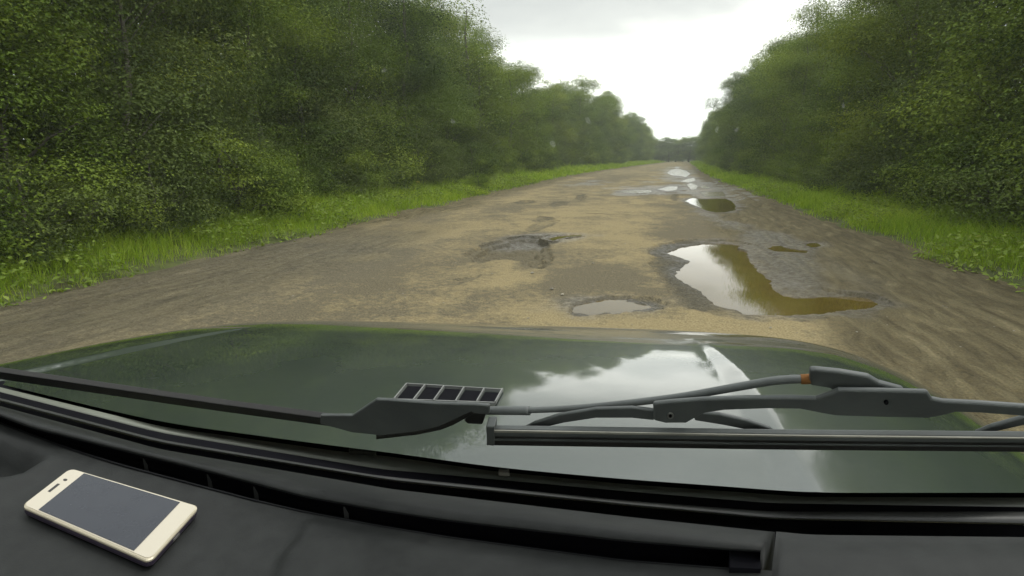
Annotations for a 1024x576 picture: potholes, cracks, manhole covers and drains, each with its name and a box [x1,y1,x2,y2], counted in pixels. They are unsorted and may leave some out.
pothole [680,196,743,215]
pothole [643,239,906,324]
pothole [666,168,693,178]
pothole [652,185,688,193]
pothole [564,294,674,318]
pothole [460,233,587,270]
